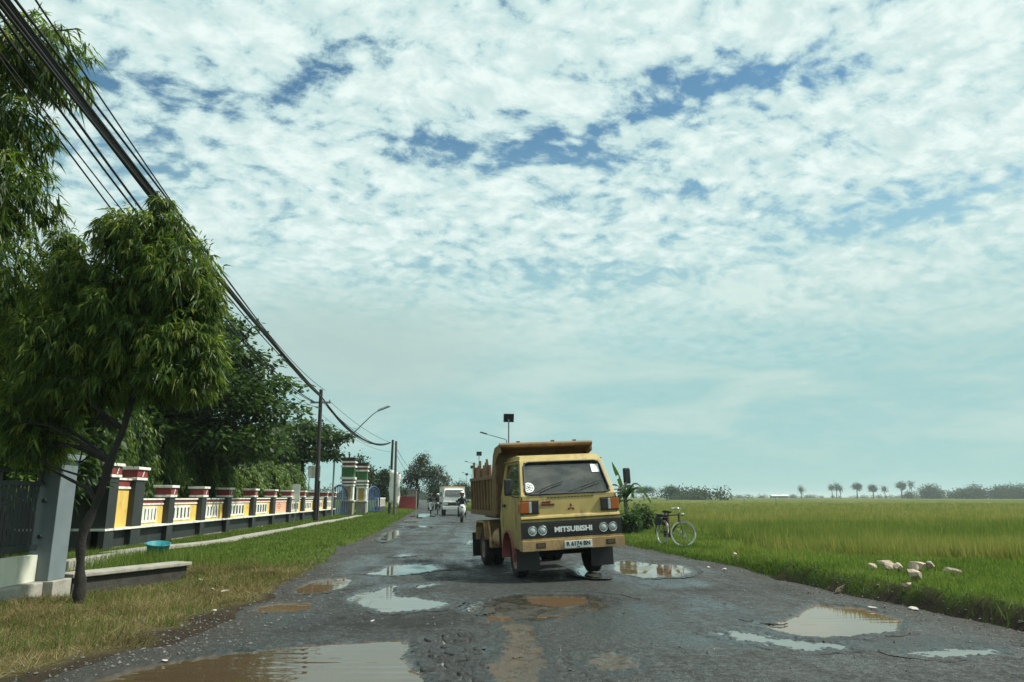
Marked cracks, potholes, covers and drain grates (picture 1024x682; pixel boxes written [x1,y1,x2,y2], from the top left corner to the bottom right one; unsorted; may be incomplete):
pothole [393,581,452,590]
pothole [334,583,466,615]
pothole [241,600,329,614]
pothole [351,562,451,577]
pothole [59,635,445,682]
pothole [458,593,629,625]
pothole [601,559,705,579]
pothole [692,625,880,656]
pothole [878,642,1024,663]
pothole [282,576,365,595]
pothole [747,601,923,643]
